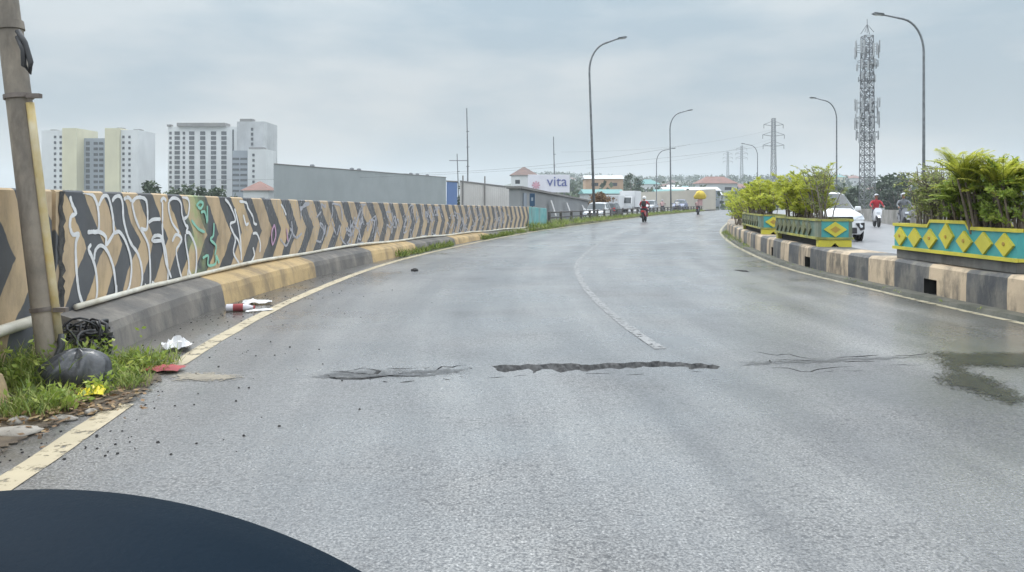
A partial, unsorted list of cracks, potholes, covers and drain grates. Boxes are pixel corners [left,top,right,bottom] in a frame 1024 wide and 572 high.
crack [328,365,698,383]
crack [753,351,927,372]
